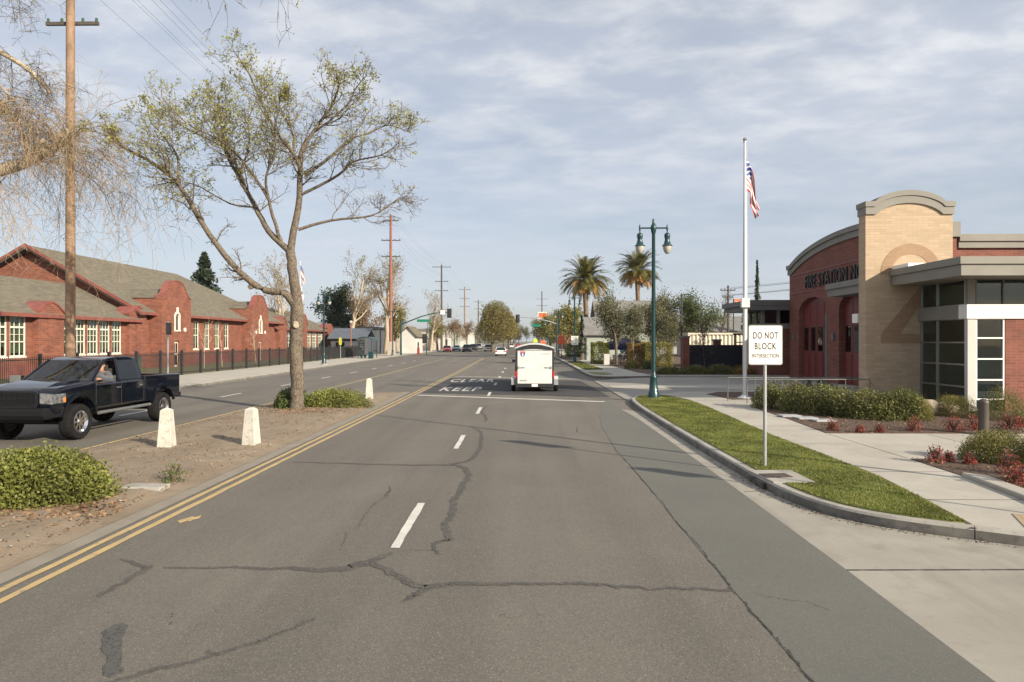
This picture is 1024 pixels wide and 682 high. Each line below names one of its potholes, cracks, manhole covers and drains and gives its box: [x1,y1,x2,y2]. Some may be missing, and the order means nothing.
drain grate [748,470,815,489]
